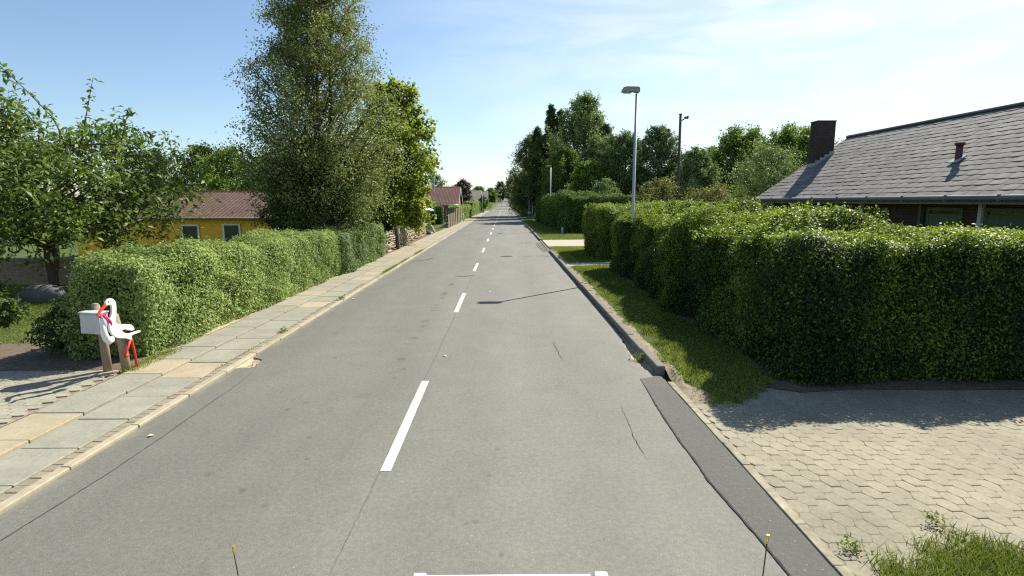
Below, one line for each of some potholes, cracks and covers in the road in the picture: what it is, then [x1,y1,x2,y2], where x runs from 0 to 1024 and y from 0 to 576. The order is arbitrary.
pothole [237,357,262,368]
crack [622,380,791,576]
